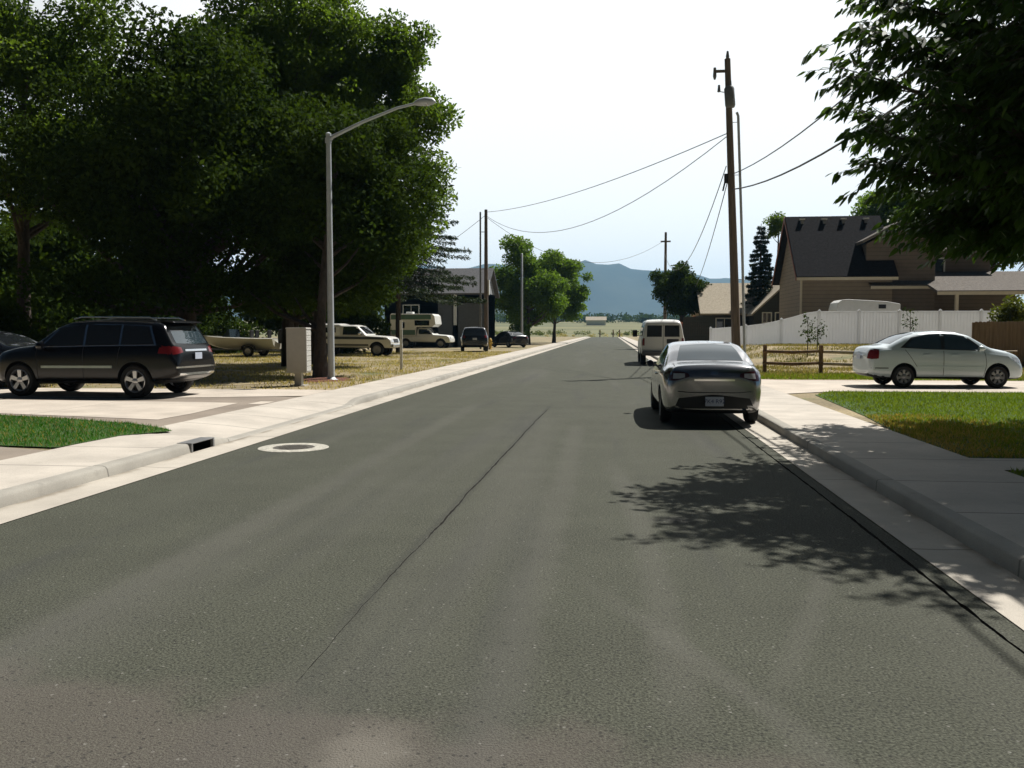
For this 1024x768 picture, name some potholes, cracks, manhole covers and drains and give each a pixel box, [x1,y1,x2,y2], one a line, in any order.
crack [301,410,547,677]
manhole cover [258,443,329,453]
drain grate [177,437,215,453]
